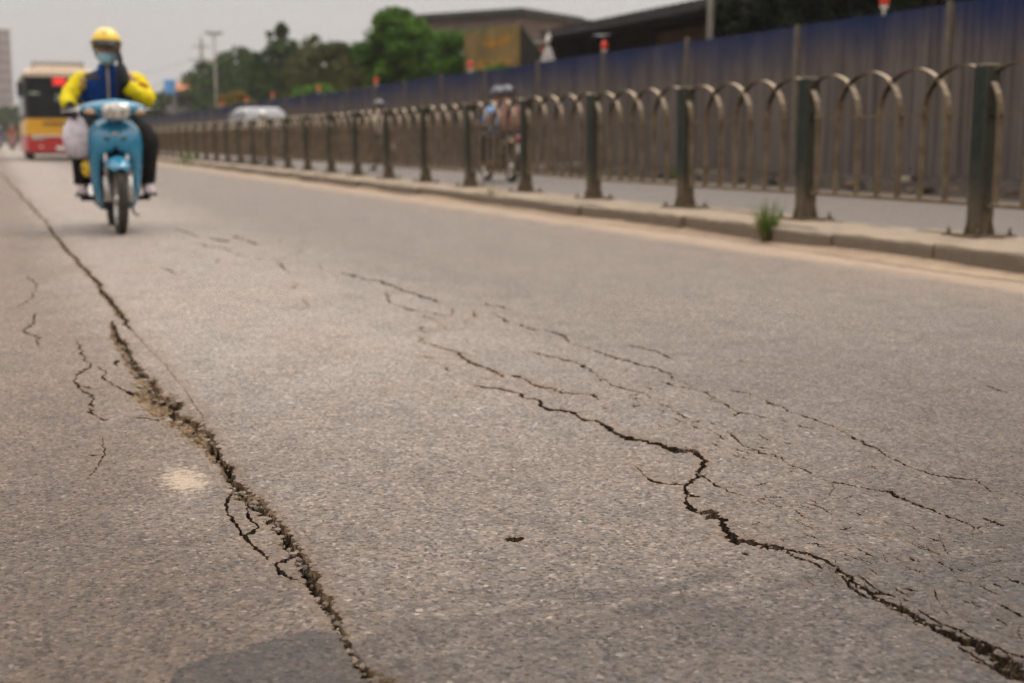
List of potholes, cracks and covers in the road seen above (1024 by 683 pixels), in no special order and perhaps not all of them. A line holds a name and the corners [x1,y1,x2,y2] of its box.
crack [0,173,1024,683]
